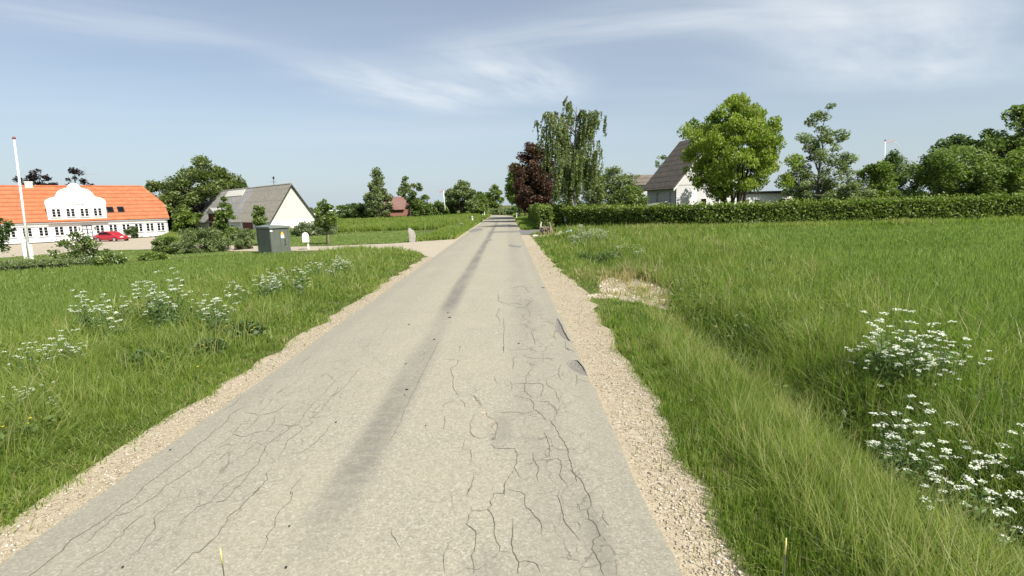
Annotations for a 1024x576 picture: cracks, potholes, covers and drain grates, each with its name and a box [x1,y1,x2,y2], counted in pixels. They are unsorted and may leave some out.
crack [443,286,617,574]
crack [29,371,357,576]
pothole [555,318,570,341]
pothole [566,360,588,376]
